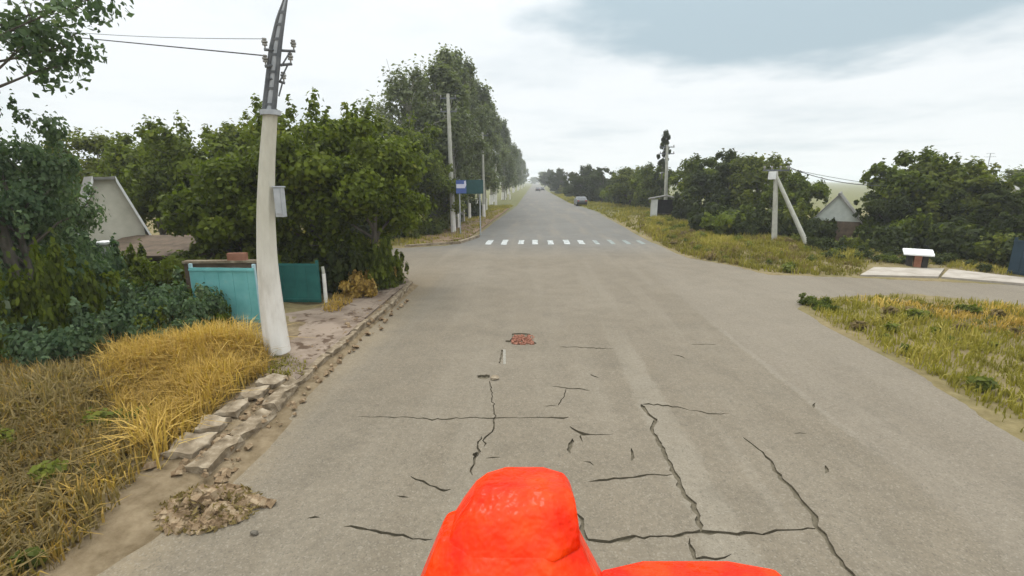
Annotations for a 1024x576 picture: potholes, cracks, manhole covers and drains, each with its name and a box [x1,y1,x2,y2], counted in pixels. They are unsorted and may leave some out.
crack [361,375,856,576]
crack [345,525,432,541]
